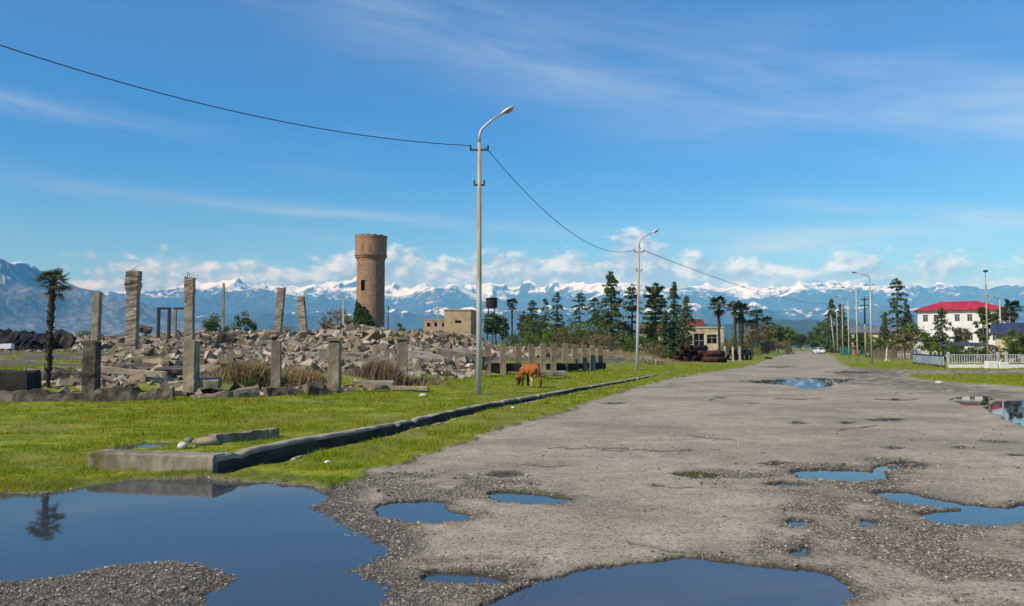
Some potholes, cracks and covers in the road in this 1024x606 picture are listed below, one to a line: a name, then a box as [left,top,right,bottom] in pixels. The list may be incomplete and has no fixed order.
pothole [869,488,1024,527]
pothole [782,517,815,527]
pothole [484,489,576,504]
pothole [786,463,902,482]
pothole [669,471,726,479]
pothole [739,378,858,389]
pothole [983,400,1024,427]
pothole [784,542,817,558]
pothole [416,568,519,586]
pothole [948,395,995,406]
pothole [371,498,480,524]
pothole [475,553,860,606]
